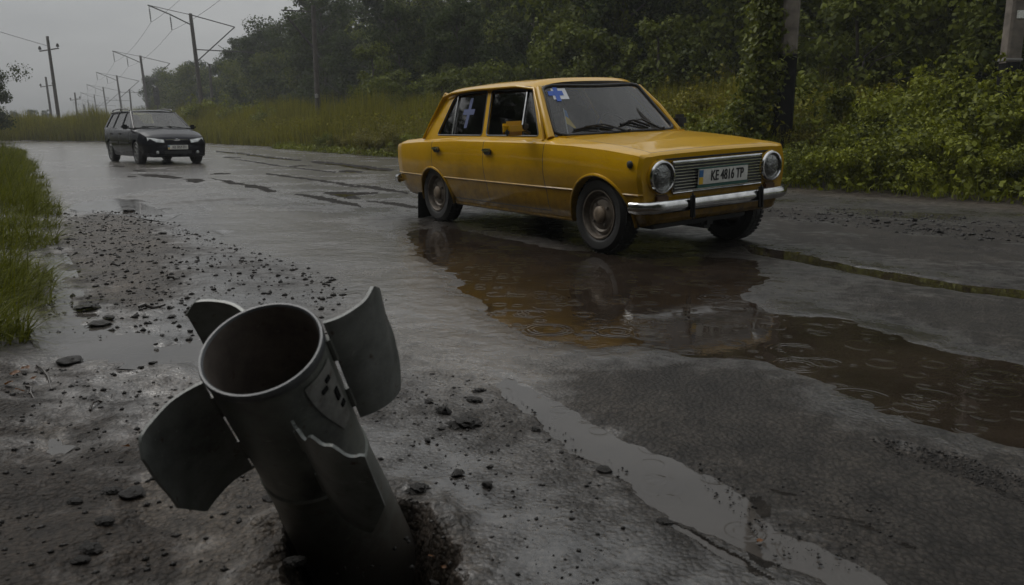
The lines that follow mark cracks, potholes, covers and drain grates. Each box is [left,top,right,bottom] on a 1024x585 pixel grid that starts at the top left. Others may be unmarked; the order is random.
pothole [768,211,1024,244]
pothole [278,489,470,585]
pothole [394,224,1024,462]
pothole [487,373,910,585]
